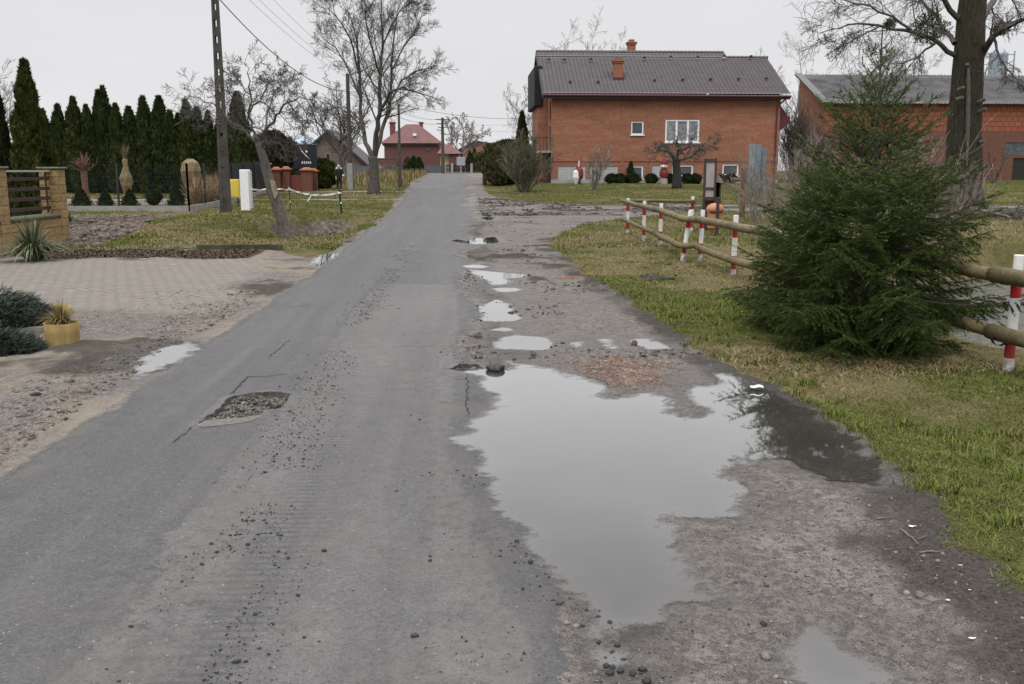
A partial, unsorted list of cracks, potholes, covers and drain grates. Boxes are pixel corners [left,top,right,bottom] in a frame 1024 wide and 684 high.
pothole [187,390,300,429]
pothole [466,270,531,285]
crack [232,340,300,393]
pothole [492,335,575,350]
pothole [442,363,486,376]
pothole [476,300,522,322]
